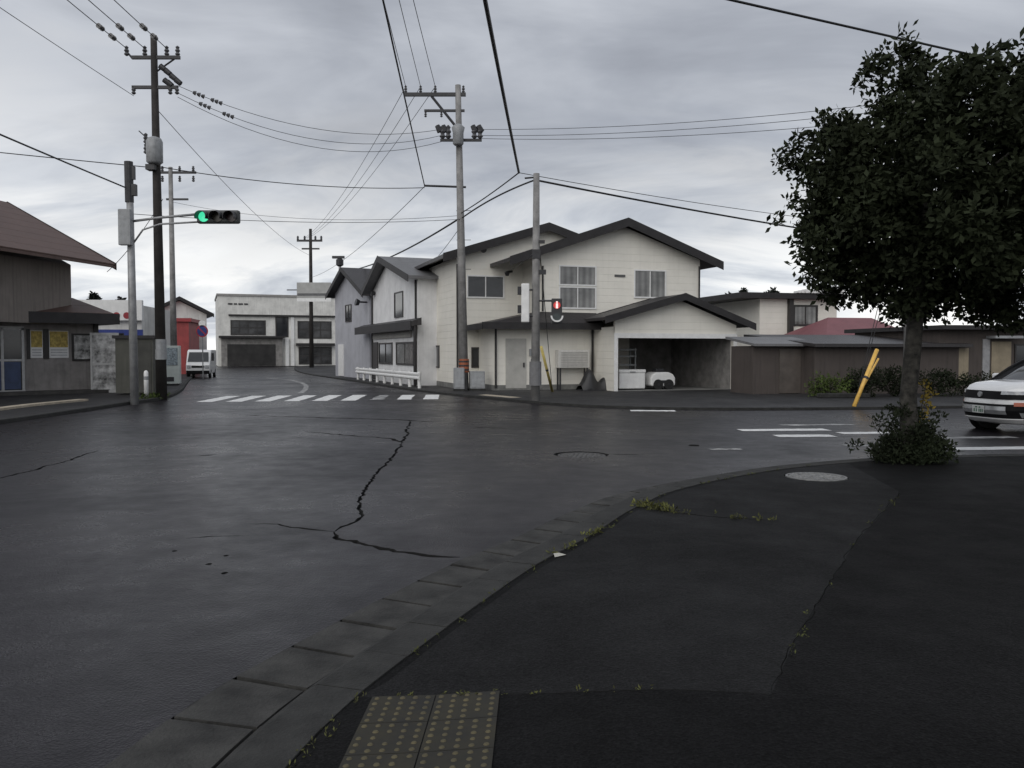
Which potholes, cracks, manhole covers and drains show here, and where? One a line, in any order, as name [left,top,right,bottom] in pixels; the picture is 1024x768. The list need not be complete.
manhole cover [785,472,847,481]
crack [1,450,98,478]
crack [251,415,454,558]
